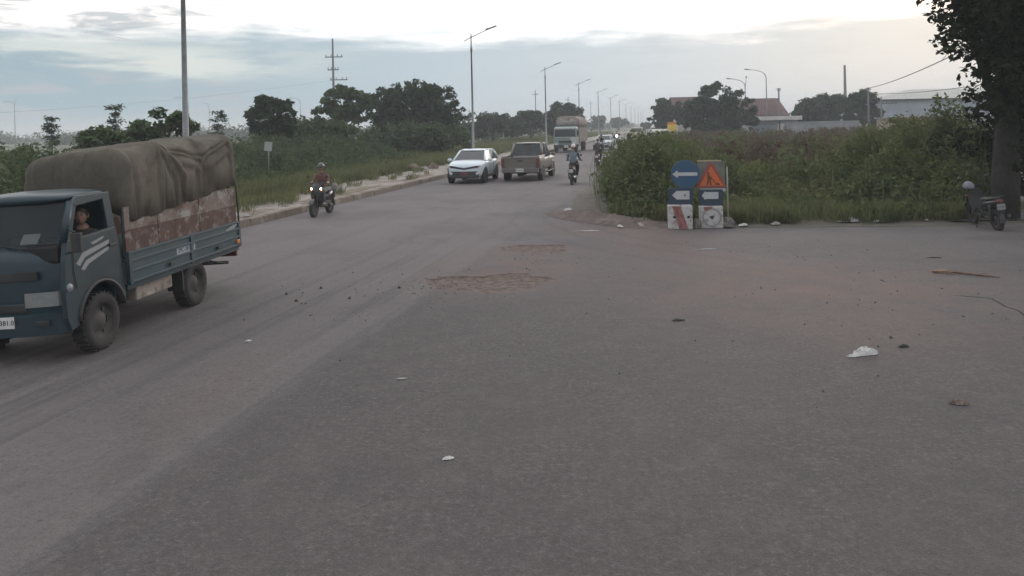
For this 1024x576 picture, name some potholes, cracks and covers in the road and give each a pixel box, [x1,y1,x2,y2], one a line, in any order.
pothole [500,244,566,254]
pothole [426,273,557,294]
